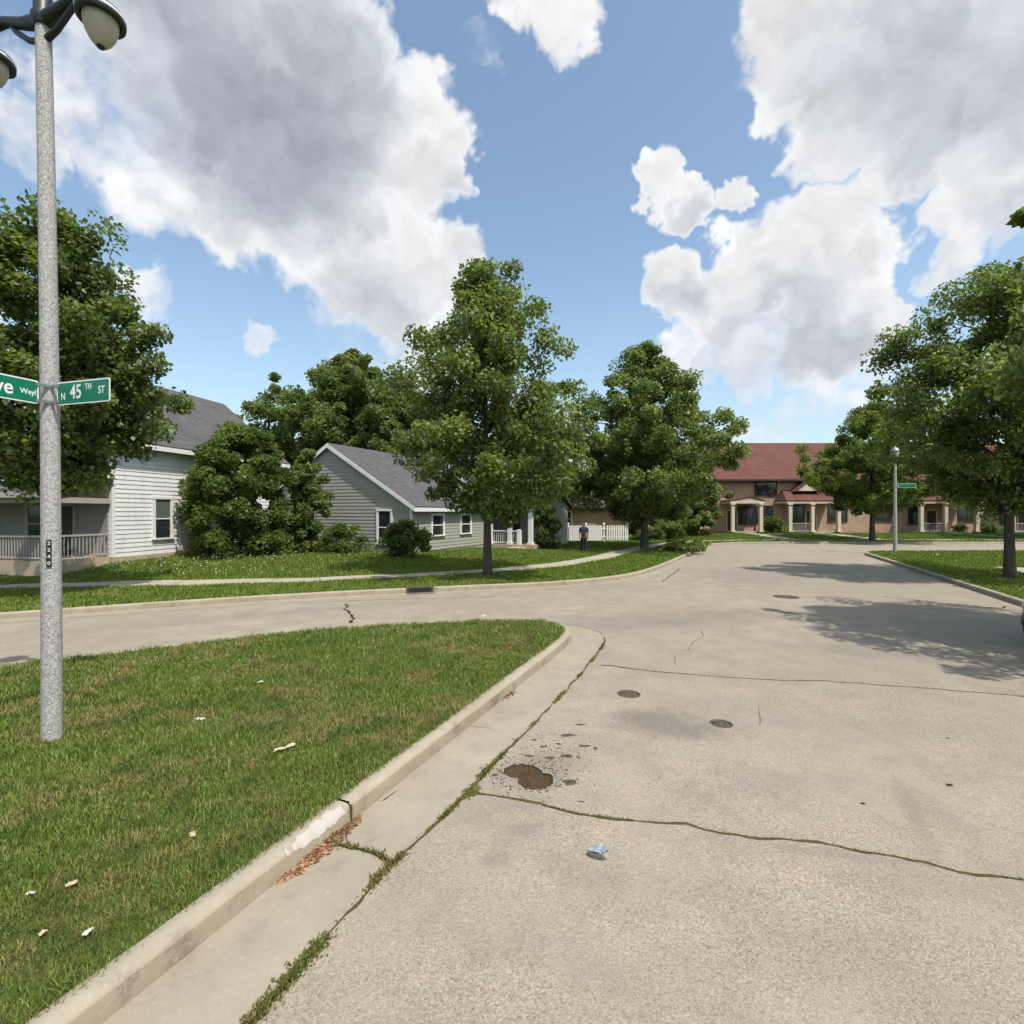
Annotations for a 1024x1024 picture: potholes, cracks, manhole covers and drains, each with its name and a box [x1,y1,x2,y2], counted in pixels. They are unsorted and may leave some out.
crack [330,838,391,866]
crack [475,792,1024,881]
utility cover [617,690,641,698]
crack [317,596,494,623]
pothole [489,729,621,802]
crack [600,631,1024,697]
utility cover [710,719,733,728]
drain grate [406,585,435,595]
